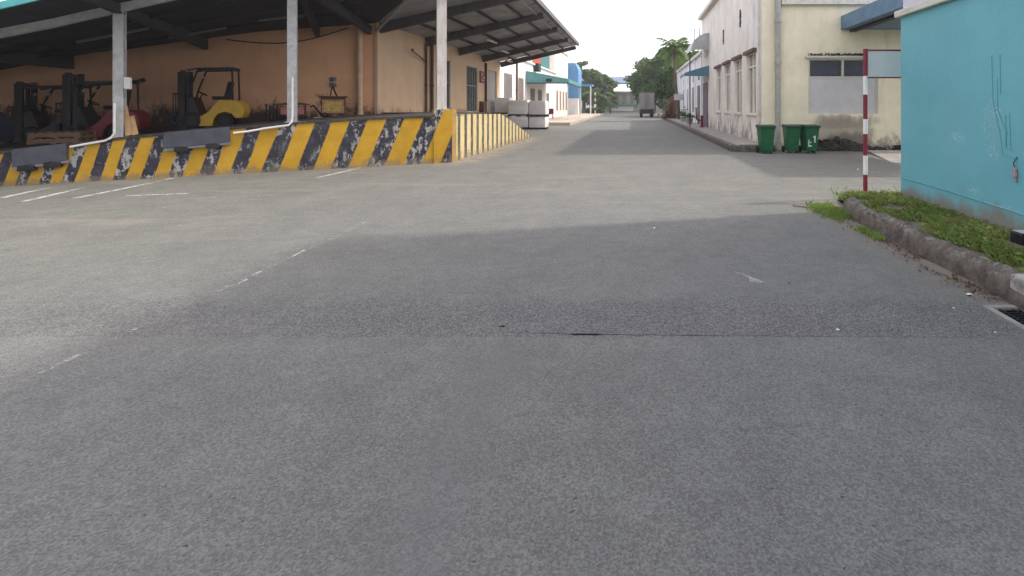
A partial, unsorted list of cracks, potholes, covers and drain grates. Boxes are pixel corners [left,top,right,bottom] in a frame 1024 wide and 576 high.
drain grate [982,305,1024,330]
